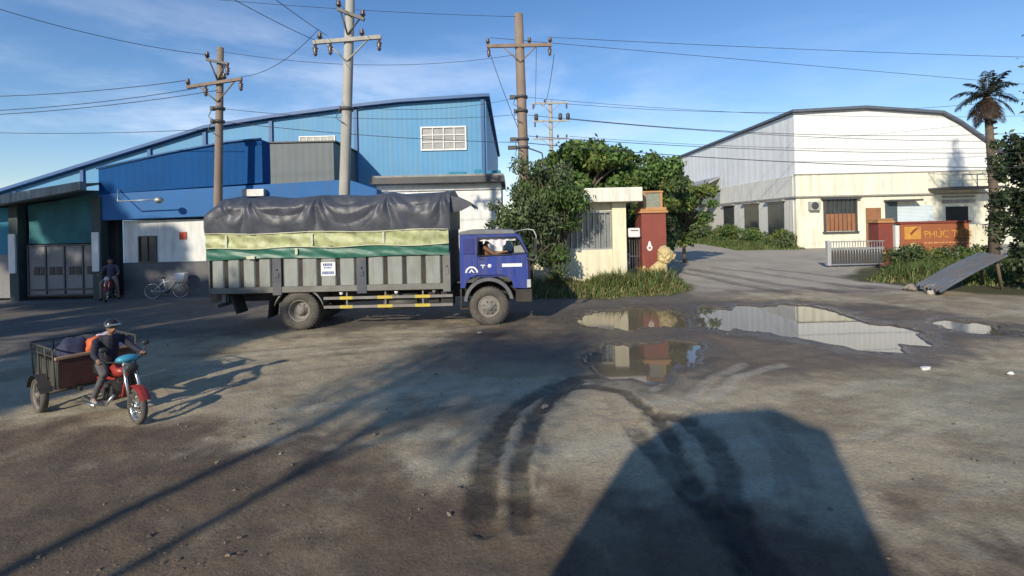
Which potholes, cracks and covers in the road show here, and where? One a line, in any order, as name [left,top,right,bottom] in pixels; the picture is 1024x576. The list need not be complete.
pothole [689,303,939,355]
pothole [572,307,692,332]
pothole [580,338,708,387]
pothole [925,318,1024,337]
